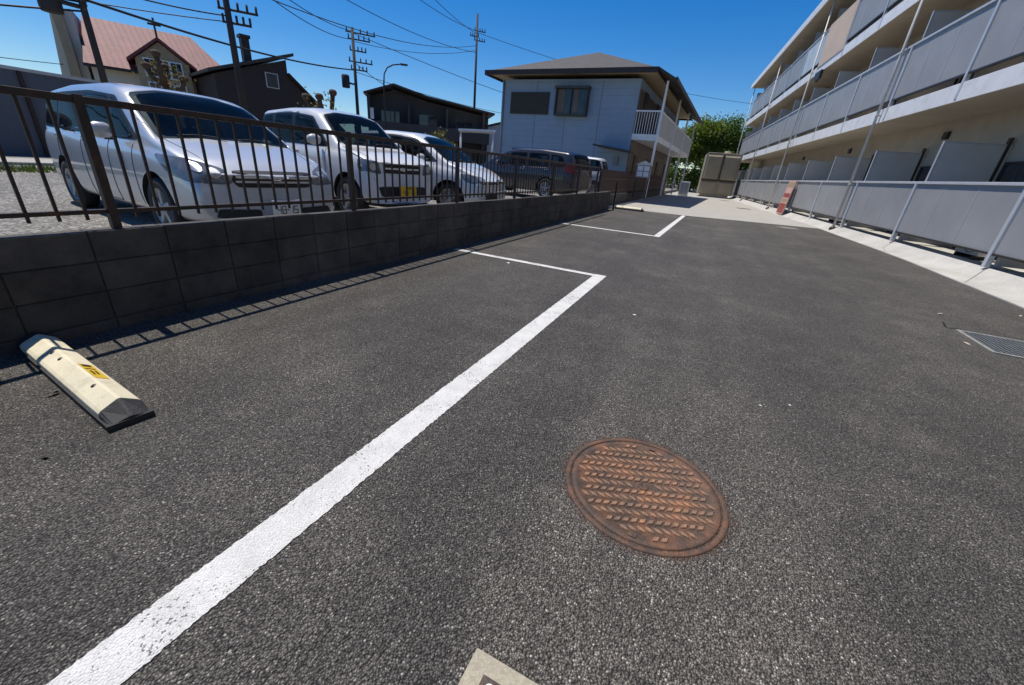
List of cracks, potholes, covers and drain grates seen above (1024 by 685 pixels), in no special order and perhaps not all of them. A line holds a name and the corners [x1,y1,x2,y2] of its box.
manhole cover [565,438,729,558]
drain grate [956,329,1024,359]
